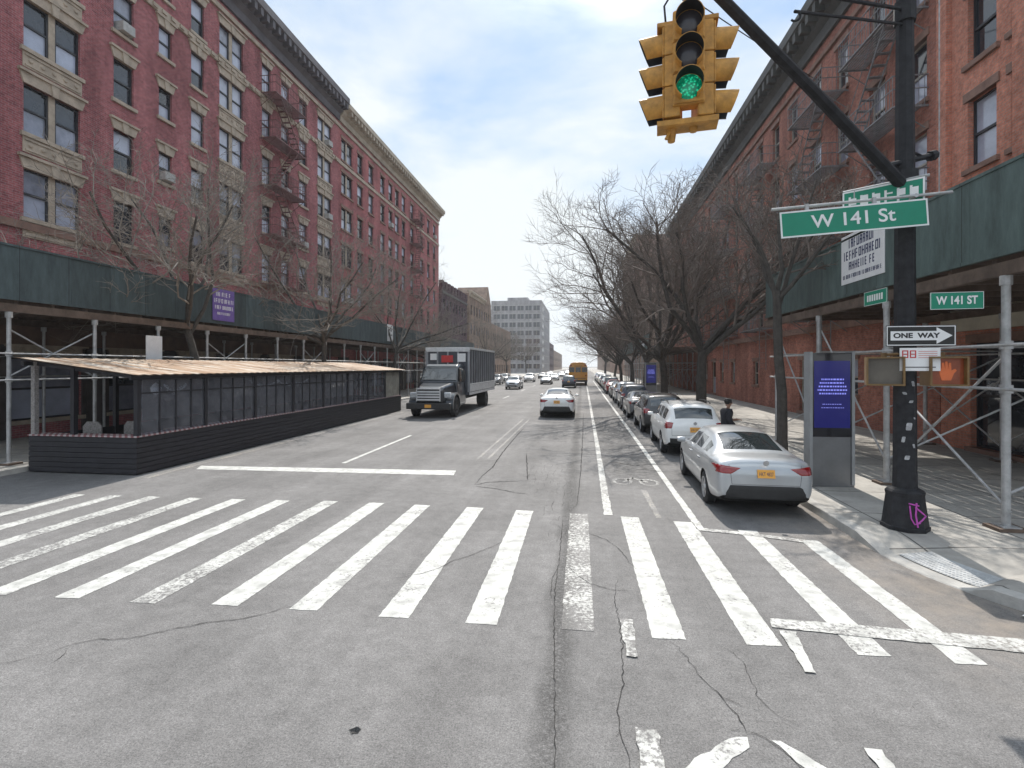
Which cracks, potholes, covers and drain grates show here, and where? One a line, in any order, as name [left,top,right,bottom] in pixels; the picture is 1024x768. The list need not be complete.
crack [569,567,630,767]
crack [469,425,632,565]
crack [667,640,804,767]
crack [5,604,300,663]
